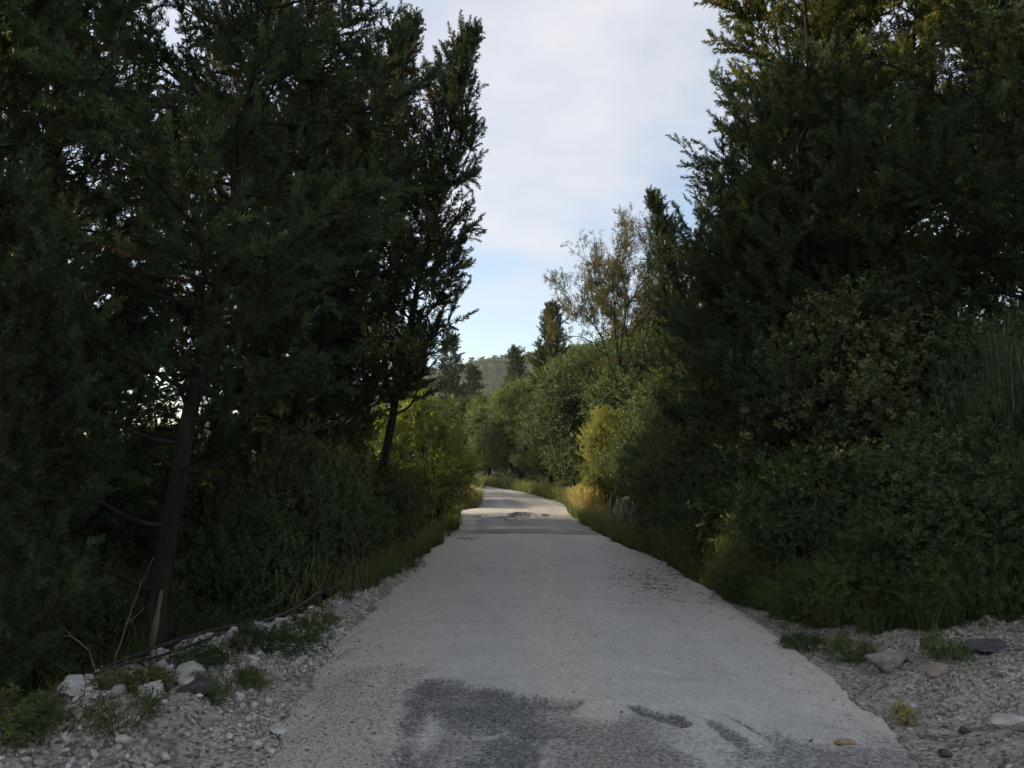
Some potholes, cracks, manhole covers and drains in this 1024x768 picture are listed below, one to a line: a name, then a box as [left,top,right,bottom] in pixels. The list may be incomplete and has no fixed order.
pothole [497,512,538,521]
